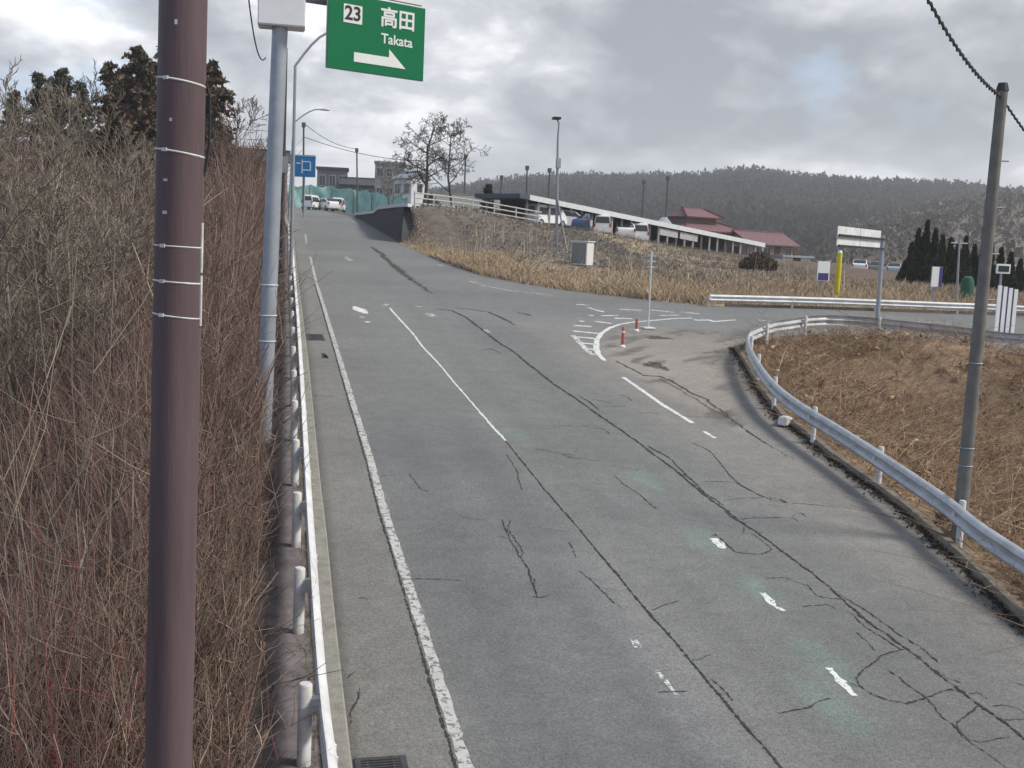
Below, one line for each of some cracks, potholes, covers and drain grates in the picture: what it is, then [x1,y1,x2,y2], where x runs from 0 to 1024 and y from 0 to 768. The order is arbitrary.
crack [347,671,360,726]
drain grate [353,755,409,768]
crack [442,308,1024,768]
crack [370,247,432,293]
